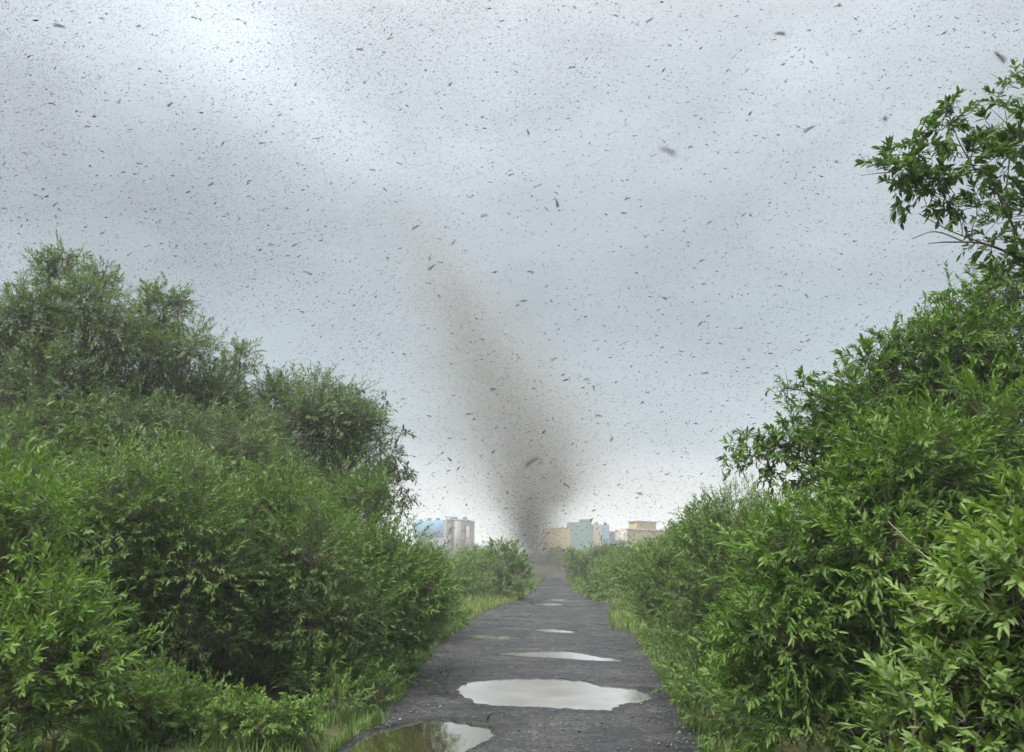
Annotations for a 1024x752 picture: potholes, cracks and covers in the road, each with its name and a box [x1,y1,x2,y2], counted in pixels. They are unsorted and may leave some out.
pothole [441,676,669,713]
pothole [492,650,632,662]
pothole [333,716,505,752]
